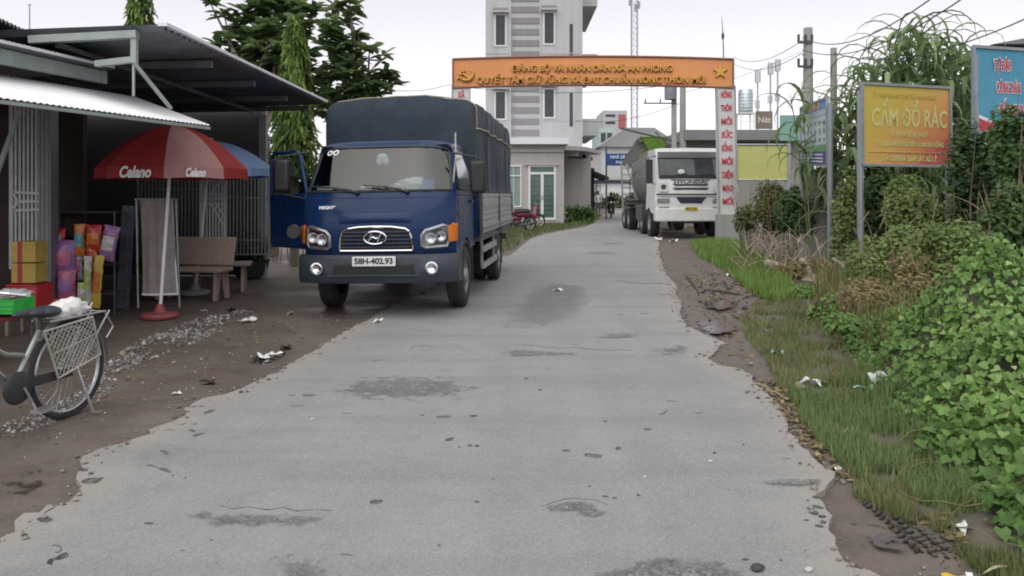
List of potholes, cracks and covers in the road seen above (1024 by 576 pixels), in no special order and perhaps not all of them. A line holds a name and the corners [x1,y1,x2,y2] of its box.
crack [589,264,671,295]
